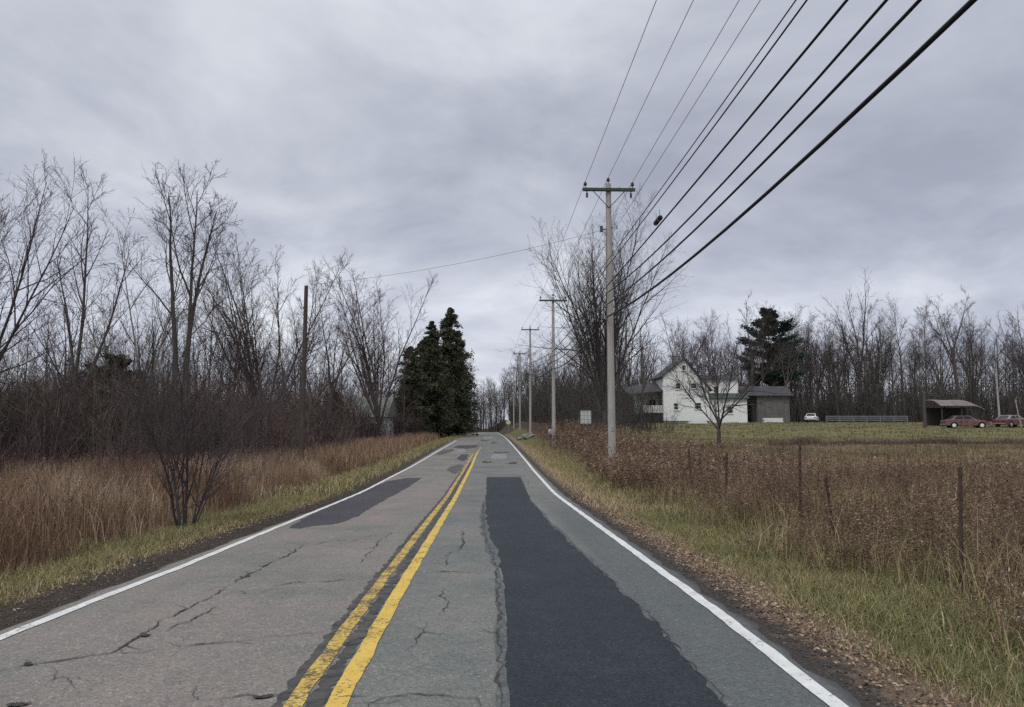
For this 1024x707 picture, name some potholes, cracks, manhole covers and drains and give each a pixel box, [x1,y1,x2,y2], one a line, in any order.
crack [340,500,503,707]
crack [0,532,392,688]
